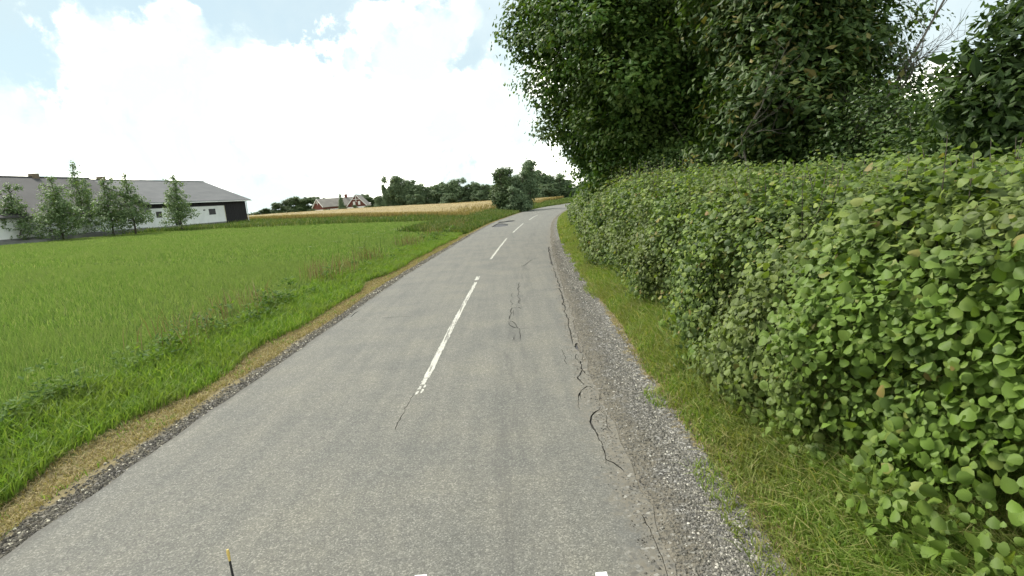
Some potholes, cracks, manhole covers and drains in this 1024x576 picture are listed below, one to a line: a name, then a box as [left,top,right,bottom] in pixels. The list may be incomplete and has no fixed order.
crack [548,248,623,470]
crack [509,284,521,340]
